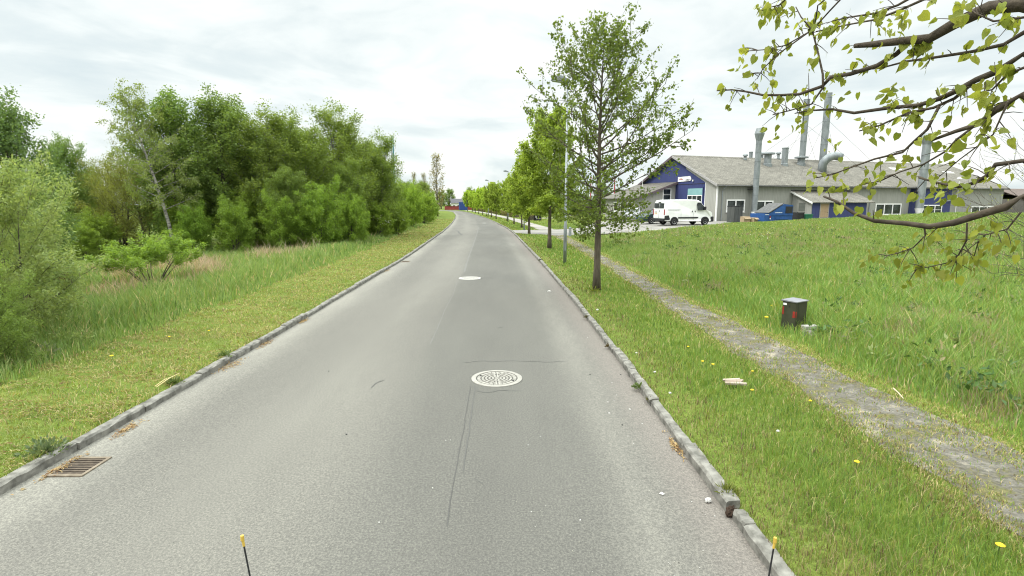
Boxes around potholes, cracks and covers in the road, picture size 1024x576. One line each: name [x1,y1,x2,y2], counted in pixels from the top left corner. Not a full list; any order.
manhole cover [471,370,522,387]
drain grate [46,457,112,477]
